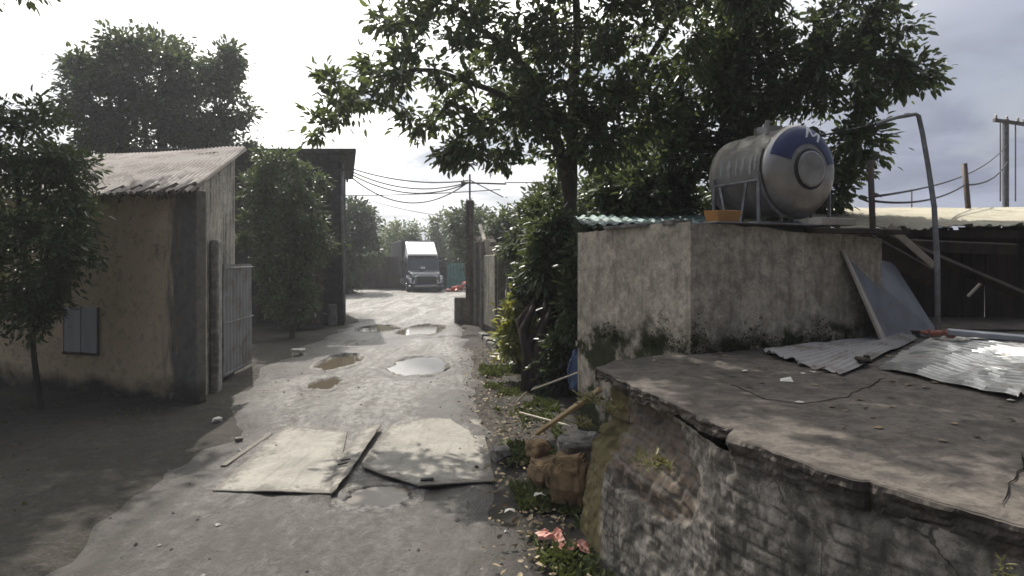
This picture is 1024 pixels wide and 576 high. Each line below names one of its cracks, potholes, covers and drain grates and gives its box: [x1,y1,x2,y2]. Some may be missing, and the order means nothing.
pothole [308,352,369,372]
pothole [331,481,430,512]
pothole [380,356,456,377]
pothole [300,375,351,392]
crack [731,378,884,404]
pothole [392,323,449,336]
pothole [353,324,404,333]
